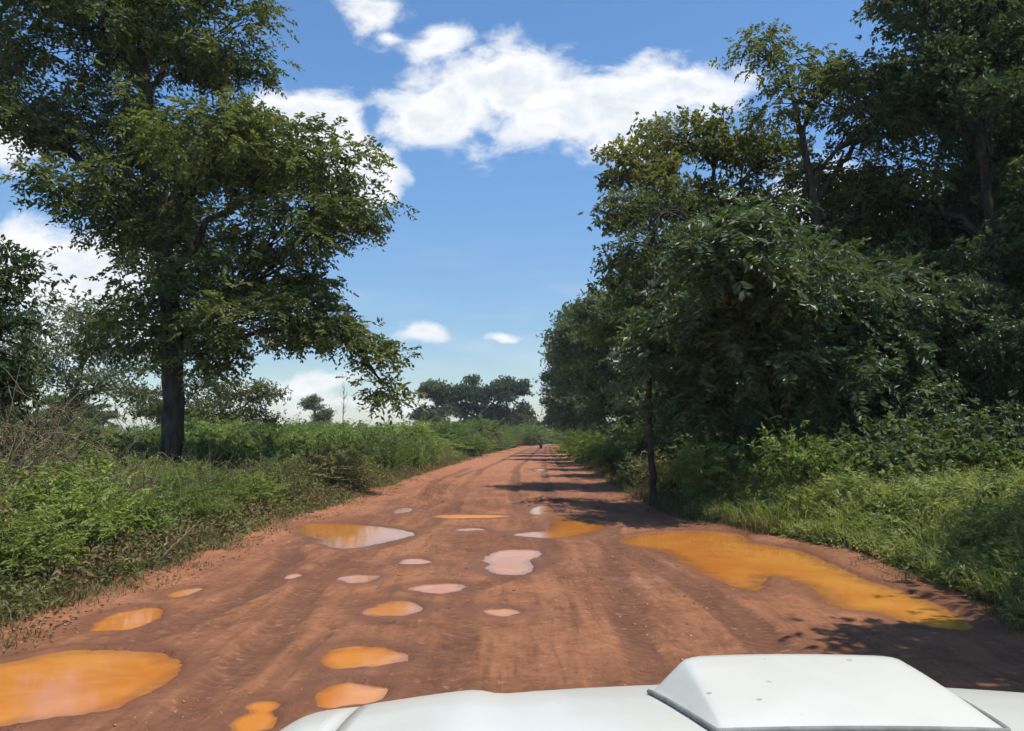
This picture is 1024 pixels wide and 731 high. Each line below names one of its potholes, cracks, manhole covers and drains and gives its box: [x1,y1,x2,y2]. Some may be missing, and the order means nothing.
pothole [471,547,553,577]
pothole [291,673,409,713]
pothole [467,604,534,620]
pothole [286,522,425,550]
pothole [504,516,614,539]
pothole [295,639,434,673]
pothole [349,597,439,619]
pothole [612,529,1004,633]
pothole [0,643,203,731]
pothole [71,604,179,634]
pothole [327,572,393,585]
